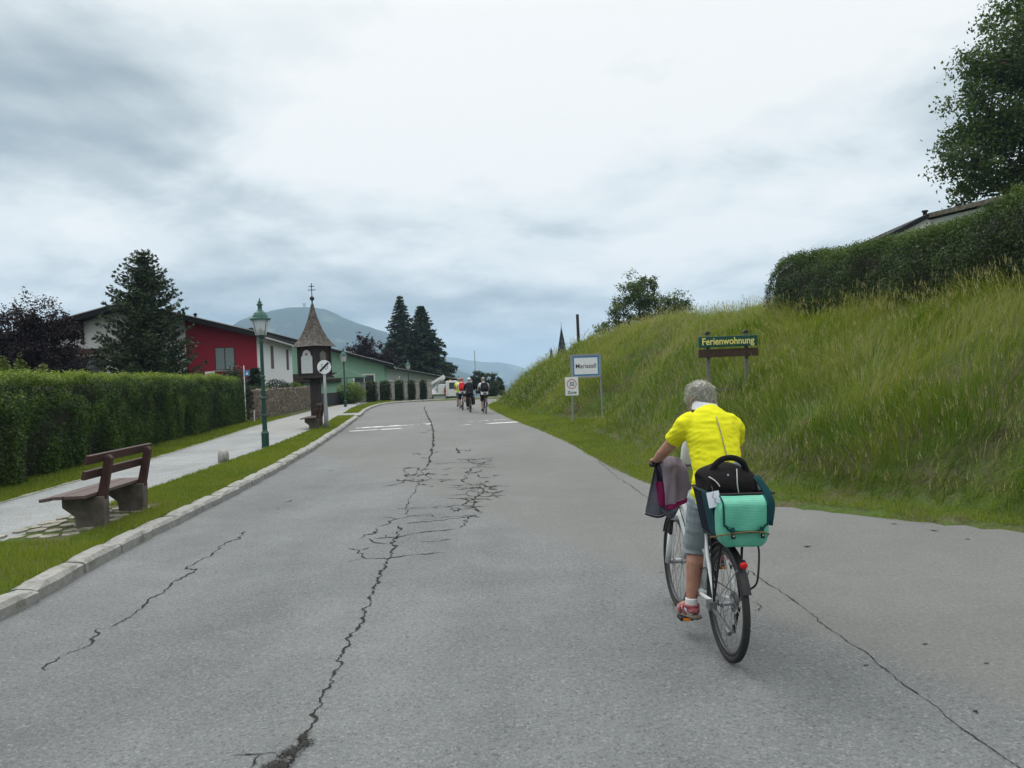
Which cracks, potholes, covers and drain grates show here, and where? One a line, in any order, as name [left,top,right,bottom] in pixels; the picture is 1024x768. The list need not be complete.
crack [235,407,503,768]
crack [42,532,243,670]
